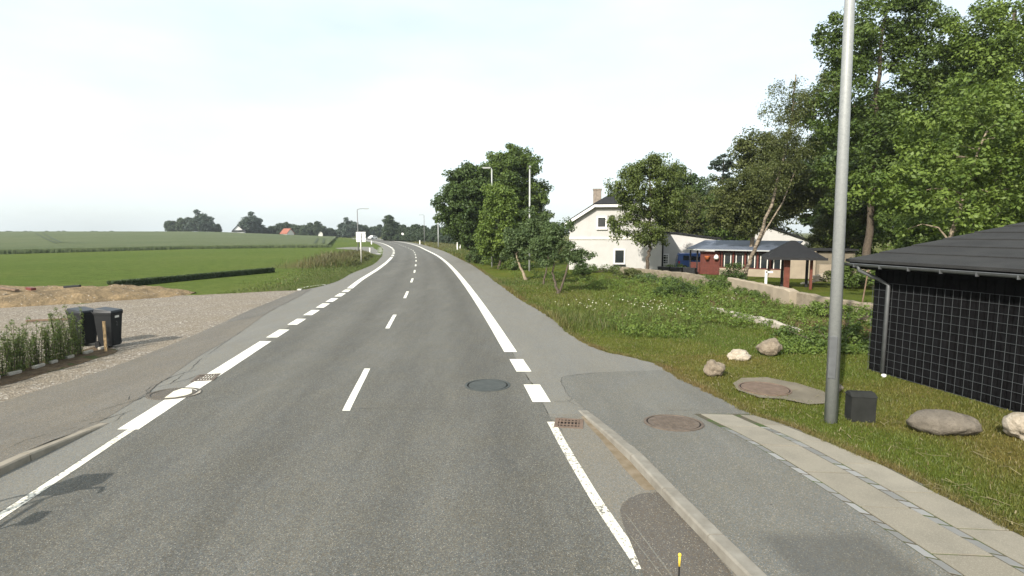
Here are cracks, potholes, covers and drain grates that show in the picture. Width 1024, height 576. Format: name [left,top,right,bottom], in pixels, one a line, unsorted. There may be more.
drain grate [554,418,584,429]
manhole cover [465,379,510,392]
manhole cover [145,387,202,400]
manhole cover [738,381,792,396]
drain grate [190,373,221,382]
manhole cover [644,414,704,432]
